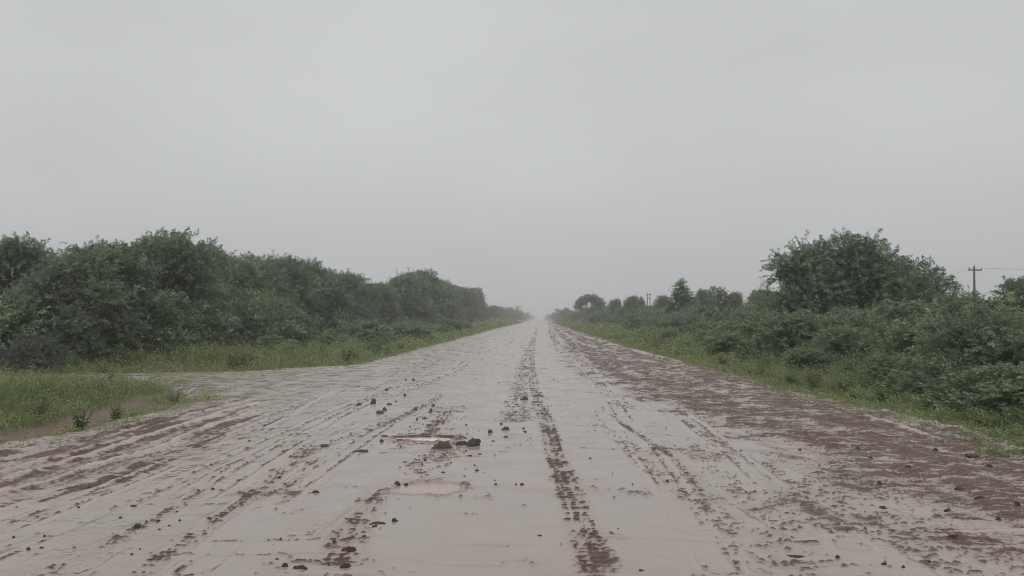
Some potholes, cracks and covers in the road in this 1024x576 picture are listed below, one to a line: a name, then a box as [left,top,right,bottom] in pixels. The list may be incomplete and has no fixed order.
pothole [381,478,469,496]
